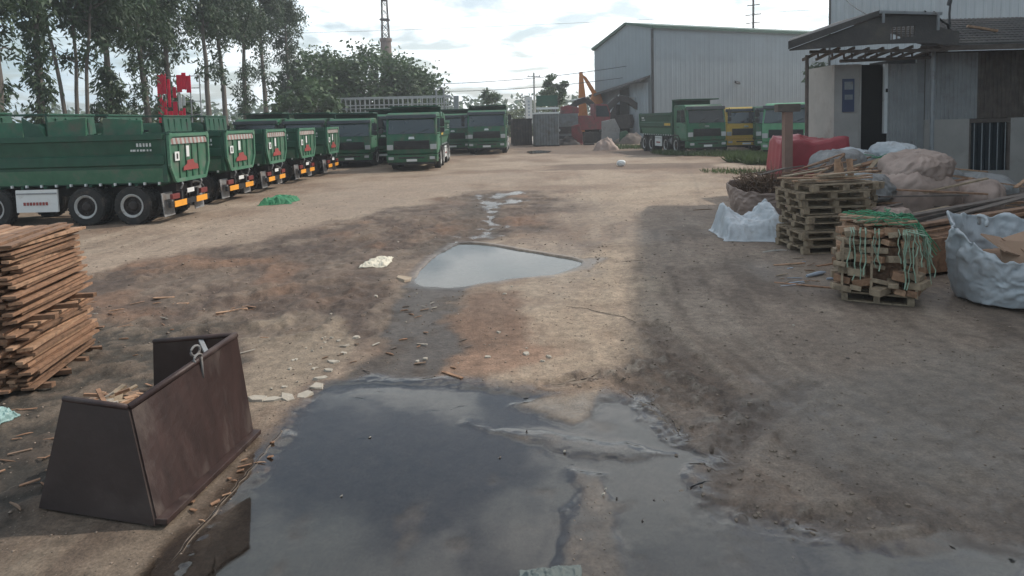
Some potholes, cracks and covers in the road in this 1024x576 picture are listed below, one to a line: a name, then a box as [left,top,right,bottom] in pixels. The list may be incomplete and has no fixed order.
crack [566,306,637,323]
pothole [402,241,592,291]
